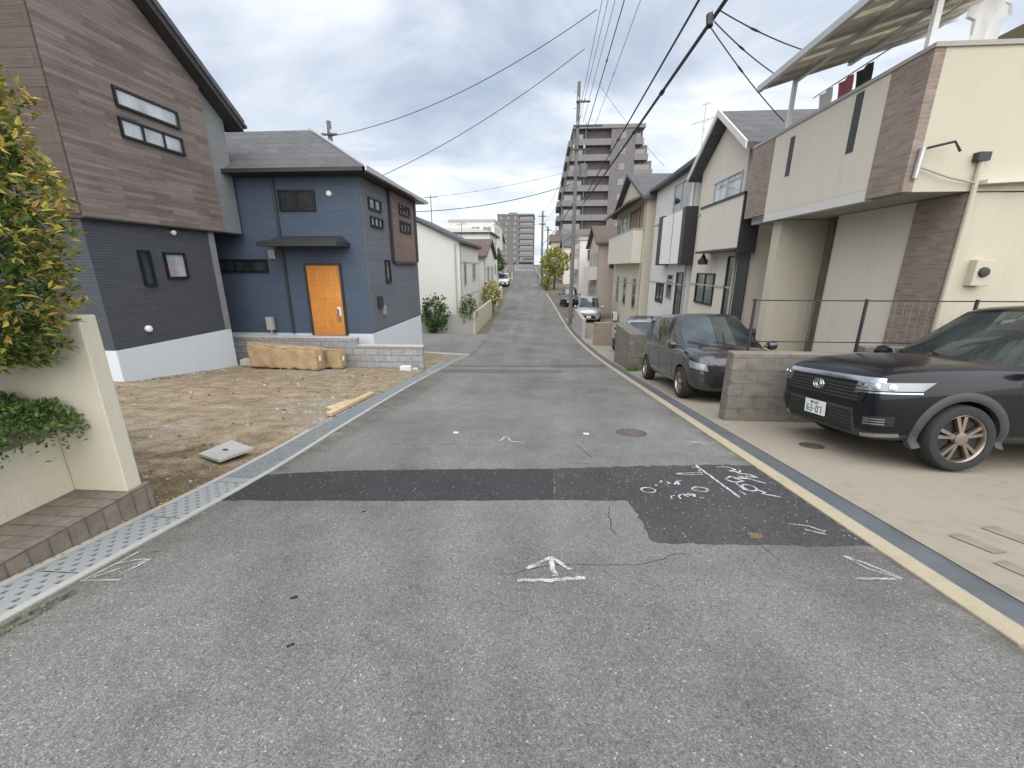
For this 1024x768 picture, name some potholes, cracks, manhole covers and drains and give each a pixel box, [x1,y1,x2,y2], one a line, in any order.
drain grate [285,425,340,446]
crack [498,553,702,574]
drain grate [350,399,384,410]
drain grate [370,390,399,399]
manhole cover [616,429,647,437]
drain grate [322,410,365,425]
drain grate [227,445,306,478]
